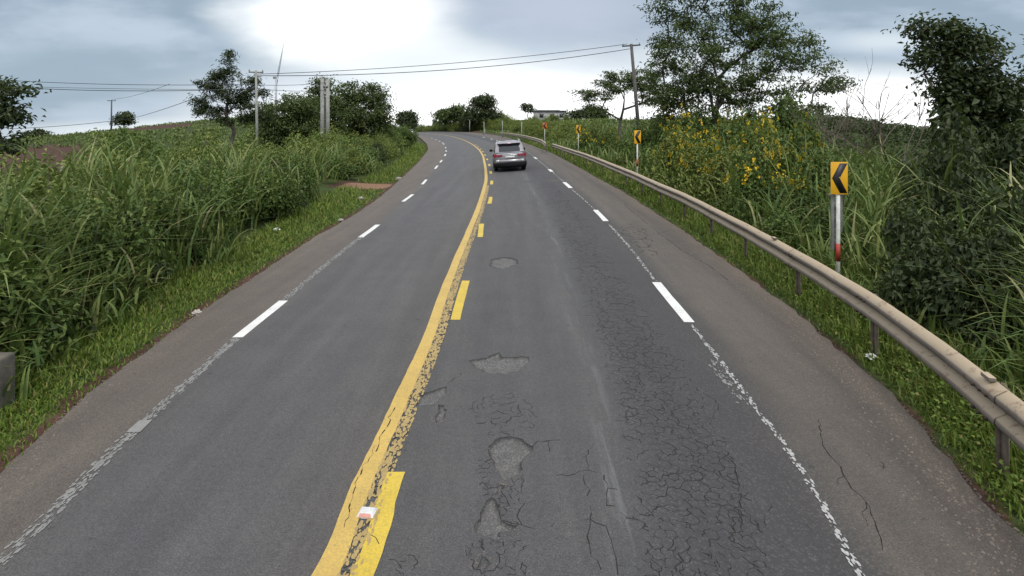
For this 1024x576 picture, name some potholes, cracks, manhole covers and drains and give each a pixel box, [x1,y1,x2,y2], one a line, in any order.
crack [537,184,784,576]
pothole [468,352,529,374]
pothole [489,257,519,269]
pothole [488,436,533,480]
pothole [435,404,447,423]
crack [465,459,554,576]
pothole [416,386,447,406]
crack [818,420,884,550]
pothole [474,497,518,539]
crack [468,393,551,451]
